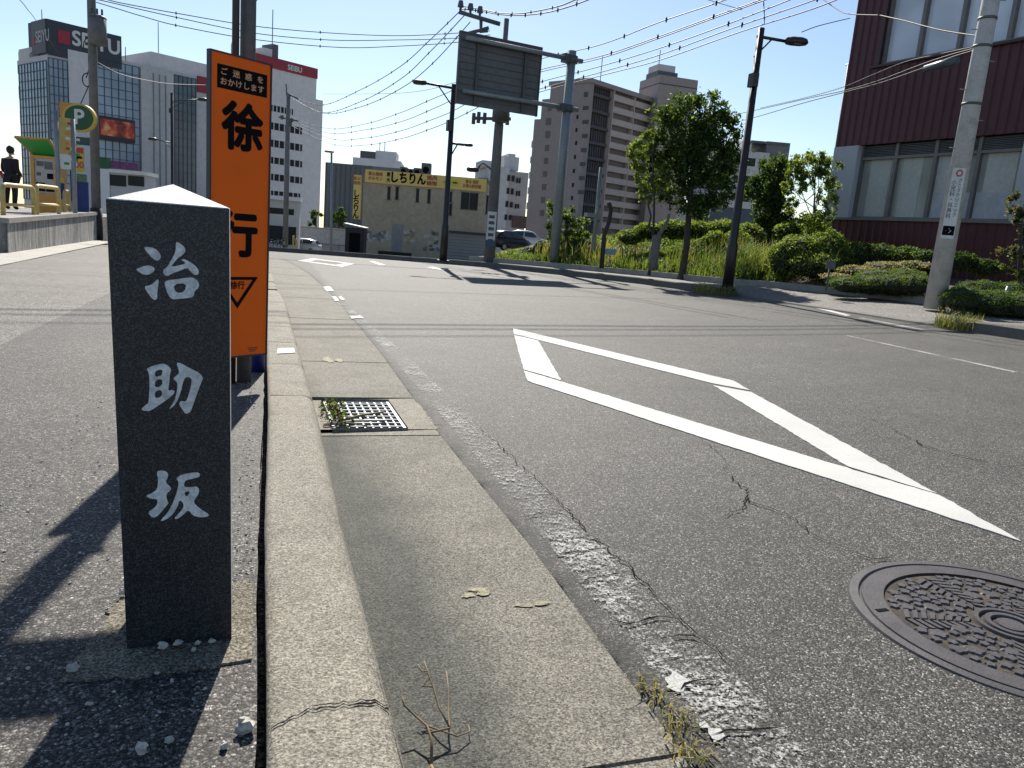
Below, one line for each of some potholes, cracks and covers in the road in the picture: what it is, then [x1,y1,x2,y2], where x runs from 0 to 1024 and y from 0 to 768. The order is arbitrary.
manhole cover [847,561,1024,698]
crack [858,415,1023,469]
crack [701,438,889,559]
drain grate [323,401,406,428]
crack [475,421,801,738]
crack [269,699,389,730]
